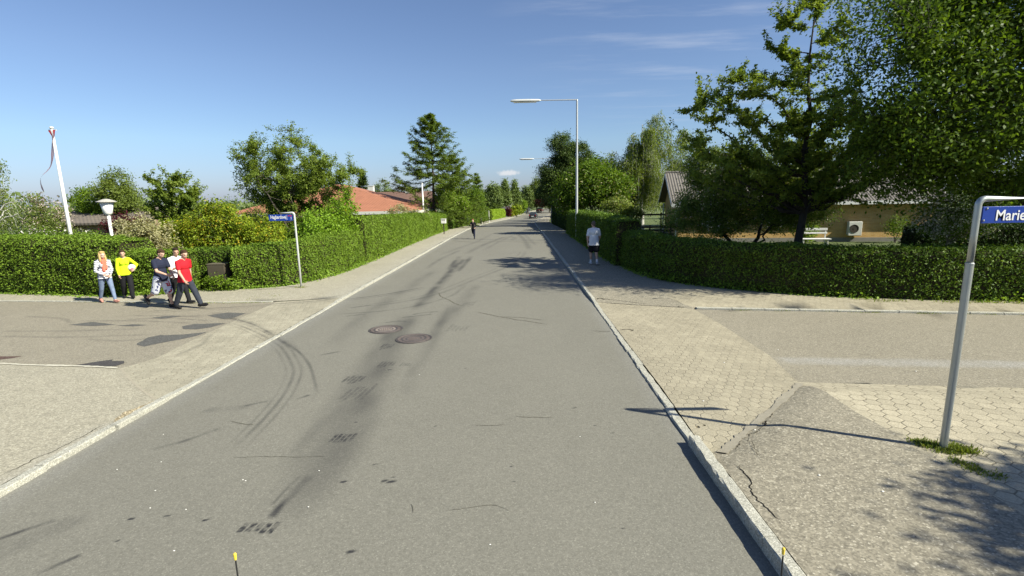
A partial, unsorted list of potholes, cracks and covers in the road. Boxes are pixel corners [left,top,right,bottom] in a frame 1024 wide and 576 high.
manhole cover [395,333,432,344]
crack [735,414,775,517]
manhole cover [368,325,403,334]
